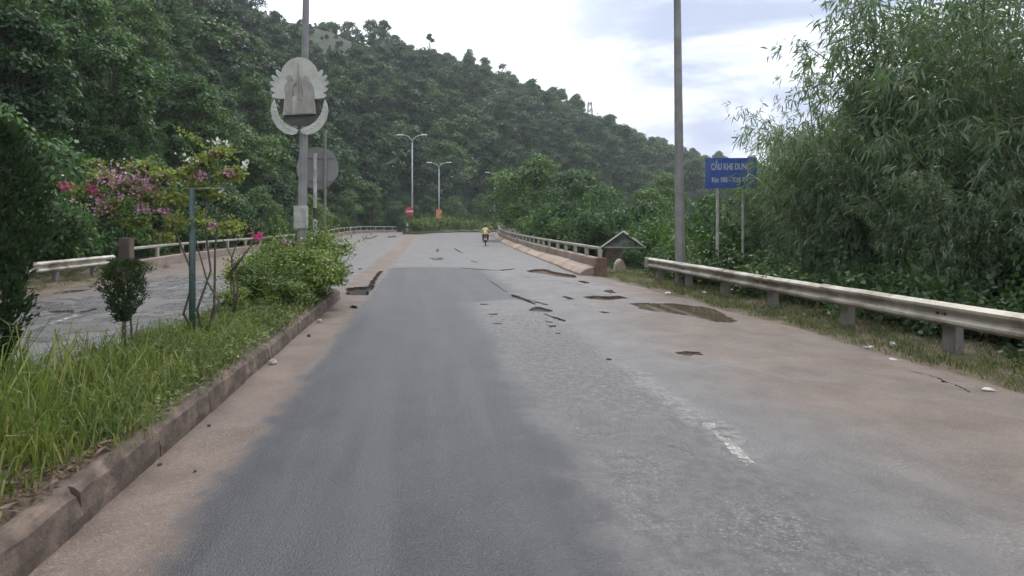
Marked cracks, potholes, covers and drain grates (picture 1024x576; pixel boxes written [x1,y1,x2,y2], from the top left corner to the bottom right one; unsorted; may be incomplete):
pothole [527,269,577,278]
pothole [344,271,383,295]
pothole [629,303,738,323]
crack [395,248,566,322]
